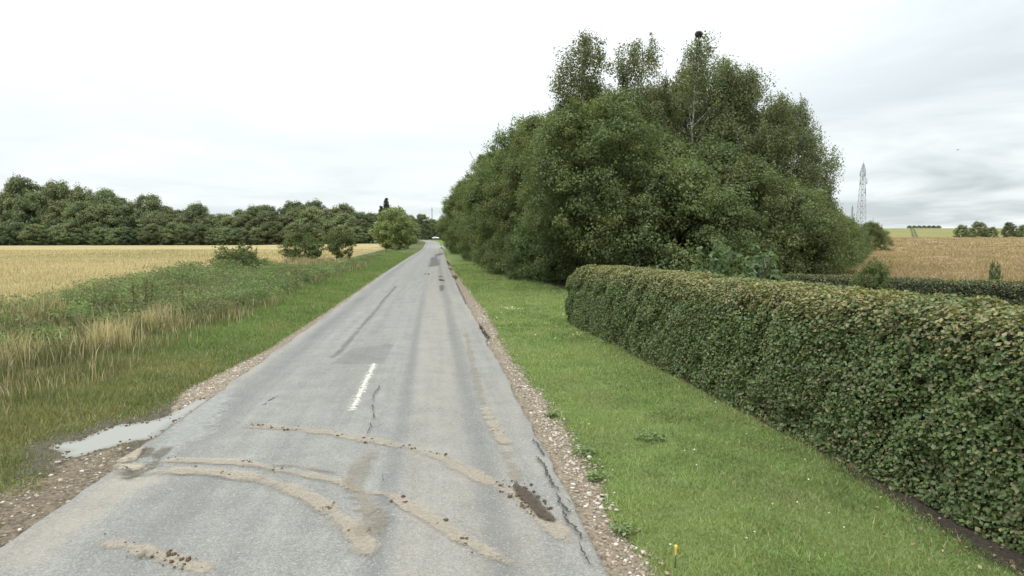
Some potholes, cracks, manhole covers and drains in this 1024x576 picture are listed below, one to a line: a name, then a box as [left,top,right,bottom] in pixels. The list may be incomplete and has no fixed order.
crack [532,438,592,565]
